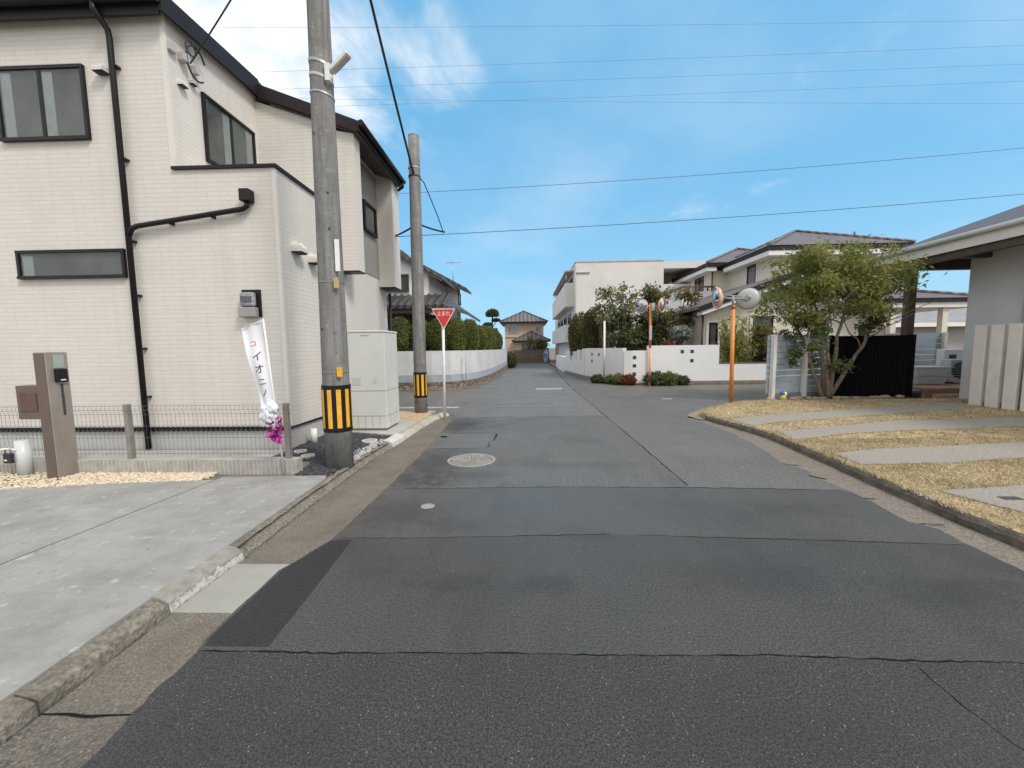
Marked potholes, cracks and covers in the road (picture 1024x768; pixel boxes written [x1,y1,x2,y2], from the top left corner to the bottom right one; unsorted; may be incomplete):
crack [919,668,1024,751]
crack [424,463,826,490]
manhole cover [447,453,495,467]
